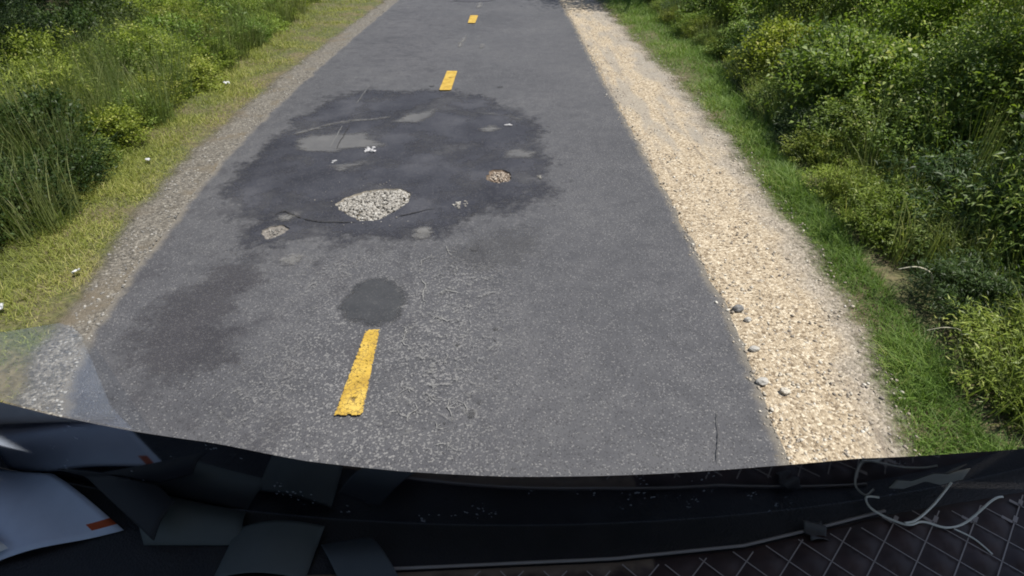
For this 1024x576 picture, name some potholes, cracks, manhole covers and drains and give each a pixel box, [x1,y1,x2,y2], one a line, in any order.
crack [391,383,468,451]
pothole [261,225,290,239]
